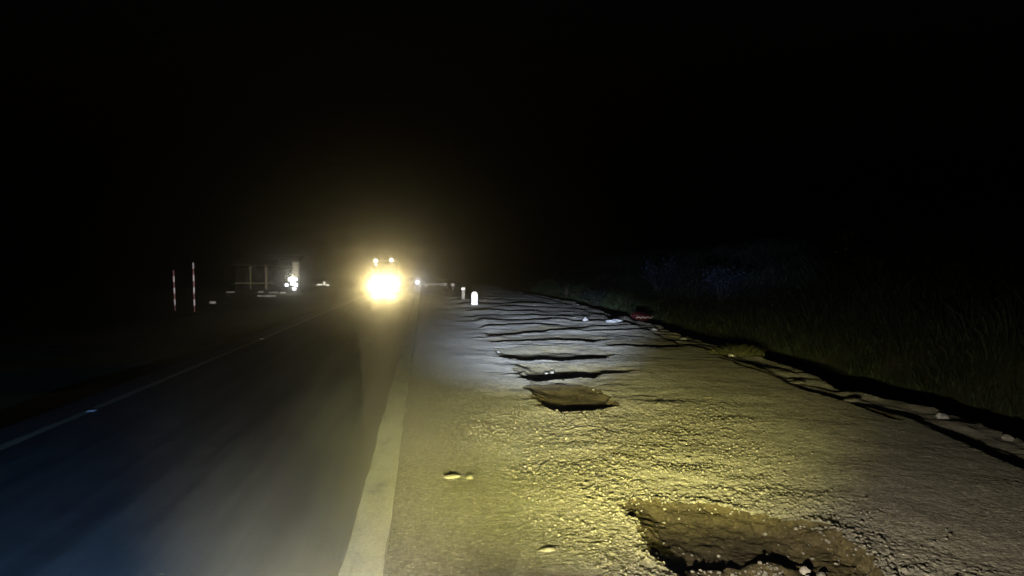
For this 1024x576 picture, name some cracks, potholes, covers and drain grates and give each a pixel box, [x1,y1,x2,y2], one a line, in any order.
pothole [618,497,885,576]
pothole [522,384,621,413]
